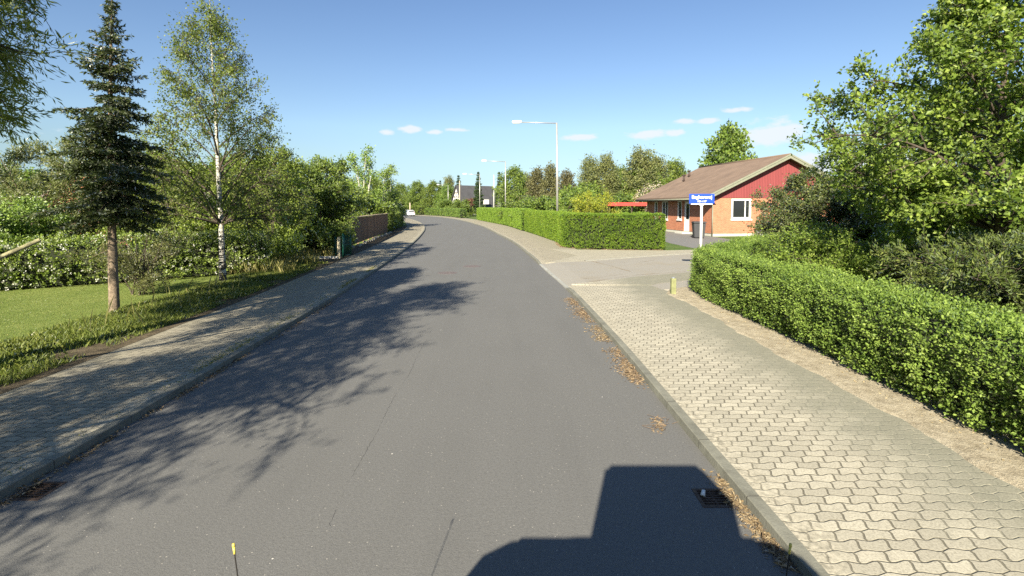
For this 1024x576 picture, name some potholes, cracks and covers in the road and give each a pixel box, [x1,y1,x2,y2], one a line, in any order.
drain grate [691,488,738,508]
